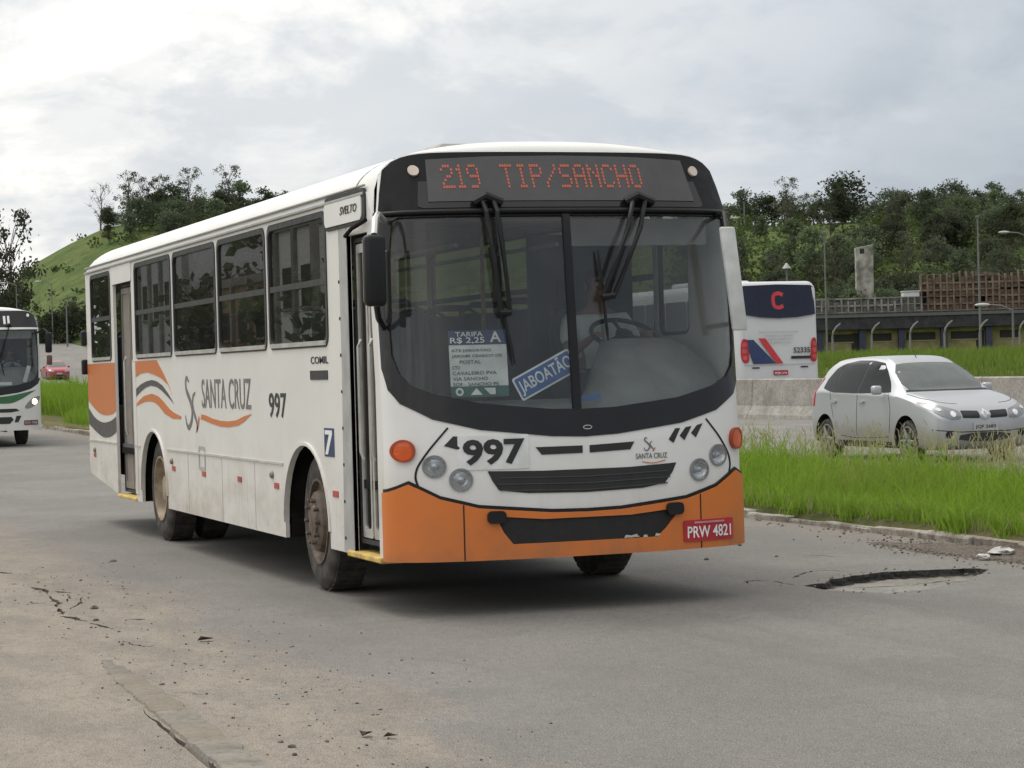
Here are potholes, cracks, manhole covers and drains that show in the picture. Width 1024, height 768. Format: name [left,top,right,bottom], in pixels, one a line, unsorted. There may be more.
pothole [806,568,989,593]
crack [744,555,848,585]
crack [30,587,149,647]
crack [143,692,216,768]
